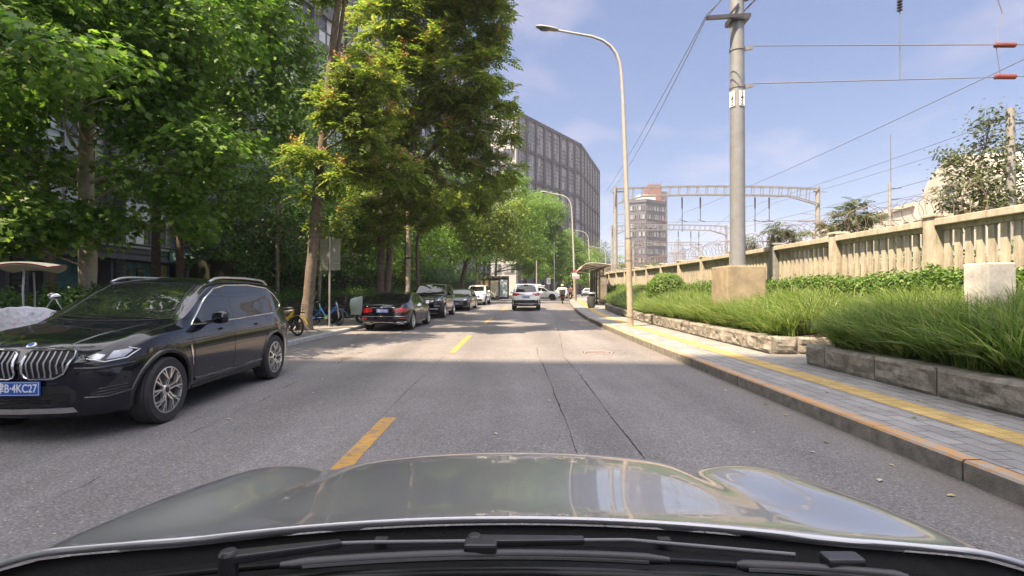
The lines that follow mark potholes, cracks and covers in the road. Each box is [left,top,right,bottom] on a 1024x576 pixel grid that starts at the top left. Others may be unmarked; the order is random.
crack [526,326,706,533]
